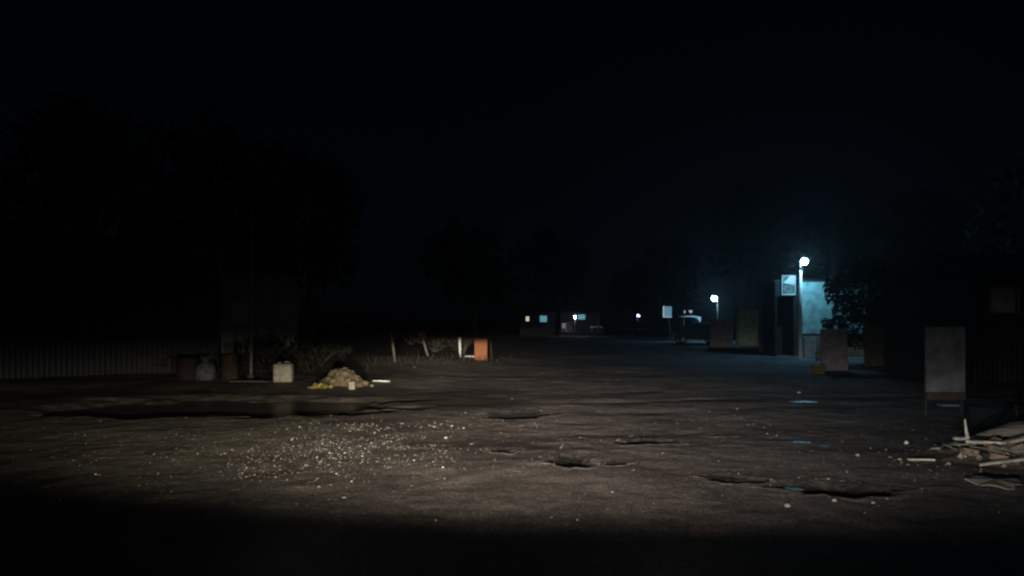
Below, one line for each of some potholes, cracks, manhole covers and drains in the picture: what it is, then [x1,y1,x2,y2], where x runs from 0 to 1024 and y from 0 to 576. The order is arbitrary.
pothole [606,438,689,446]
pothole [482,447,518,455]
pothole [690,472,785,486]
pothole [537,451,601,470]
pothole [742,480,923,502]
pothole [470,410,573,421]
pothole [595,459,641,467]
